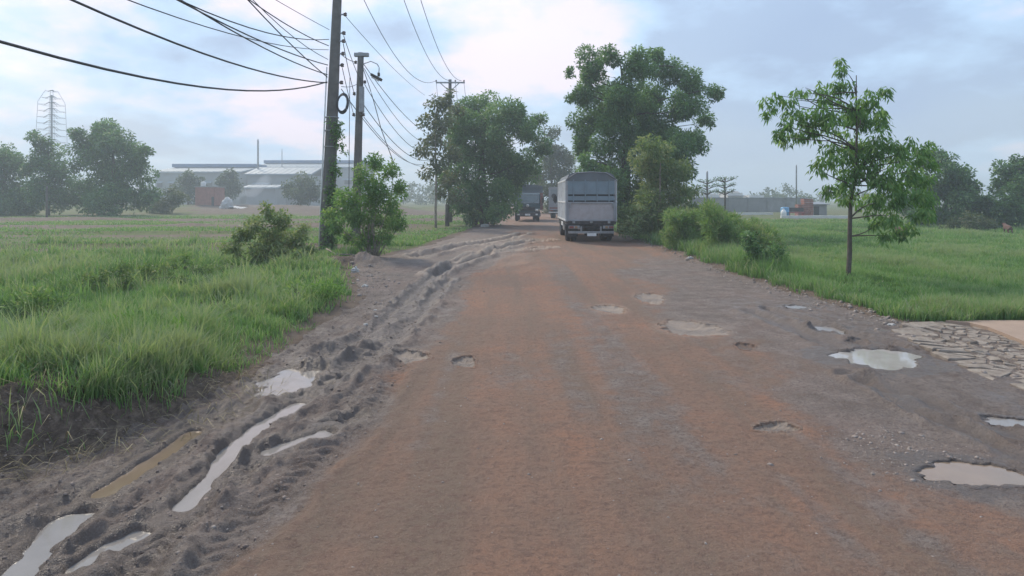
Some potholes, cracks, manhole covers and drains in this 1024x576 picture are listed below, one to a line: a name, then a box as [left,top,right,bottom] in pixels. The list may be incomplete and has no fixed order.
pothole [972,412,1024,431]
pothole [653,318,740,339]
pothole [804,321,850,336]
pothole [749,420,804,433]
pothole [733,342,758,351]
pothole [816,344,932,373]
pothole [586,305,630,314]
pothole [448,354,479,369]
pothole [388,345,435,366]
pothole [631,291,669,306]
pothole [901,457,1024,490]
